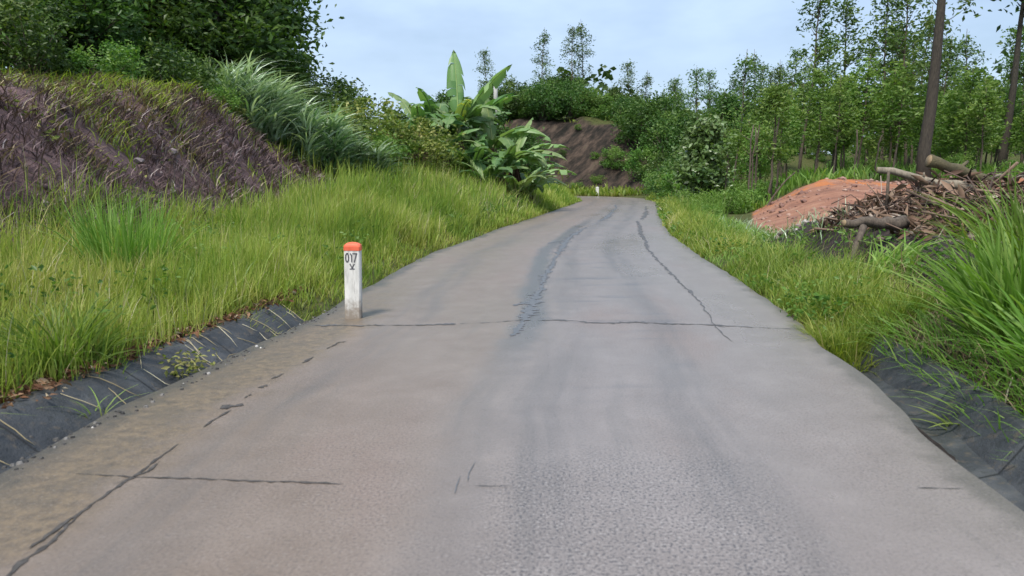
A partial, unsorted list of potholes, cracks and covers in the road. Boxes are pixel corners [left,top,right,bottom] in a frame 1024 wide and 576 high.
crack [6,205,950,576]
